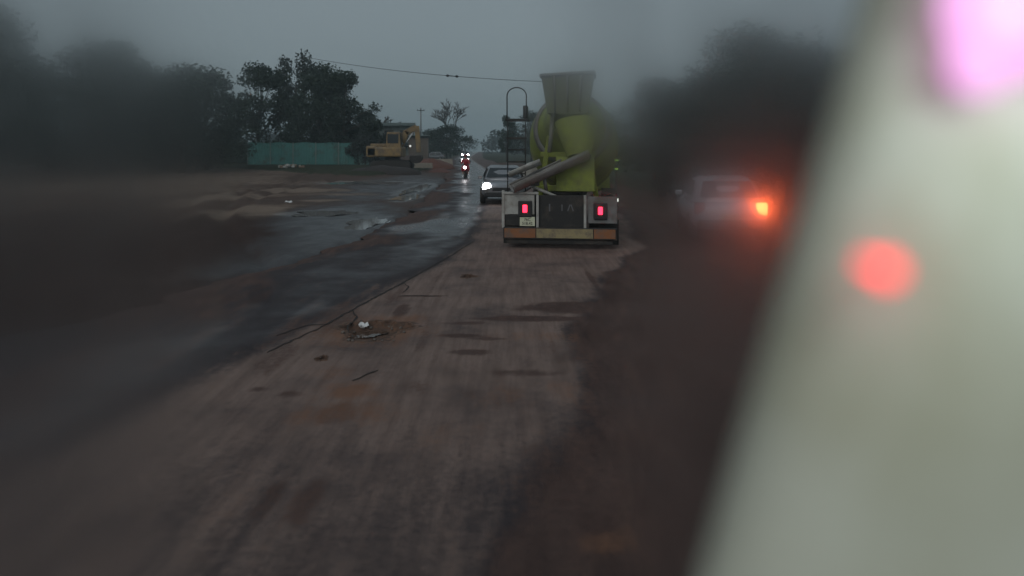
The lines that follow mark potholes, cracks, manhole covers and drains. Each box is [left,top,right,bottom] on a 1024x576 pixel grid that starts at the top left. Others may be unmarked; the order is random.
pothole [332,319,423,343]
crack [268,243,471,352]
